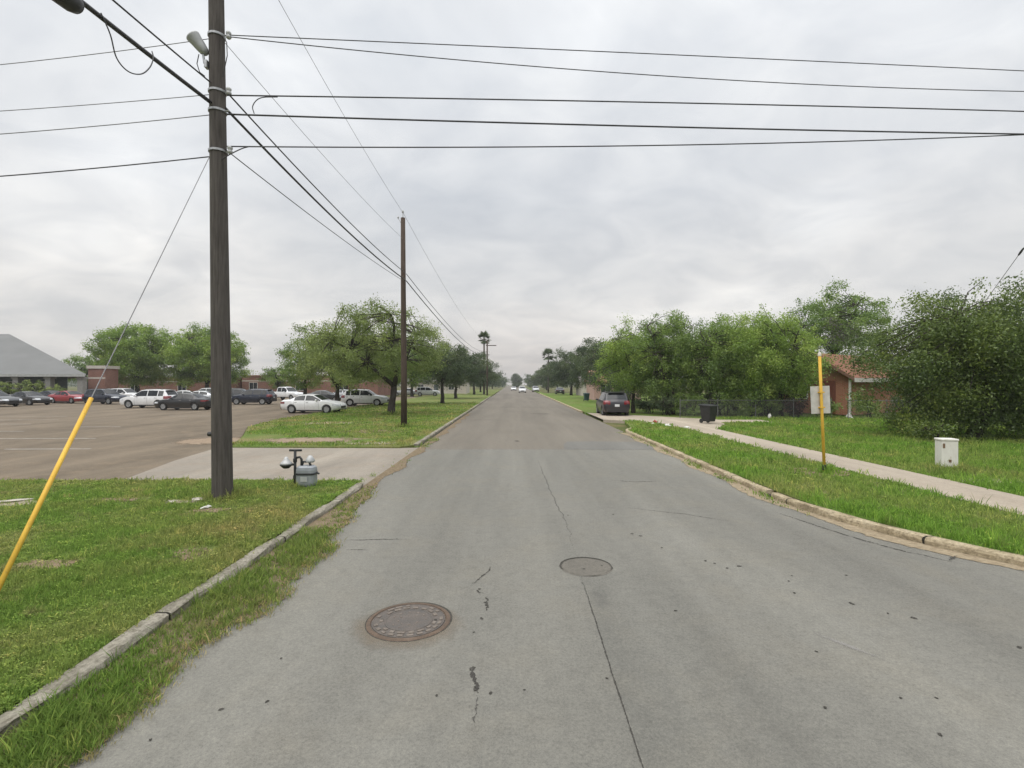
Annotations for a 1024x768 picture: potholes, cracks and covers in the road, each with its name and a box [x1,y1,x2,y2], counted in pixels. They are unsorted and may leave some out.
crack [780,513,952,562]
crack [470,669,479,726]
manhole cover [365,602,452,642]
manhole cover [559,557,613,577]
